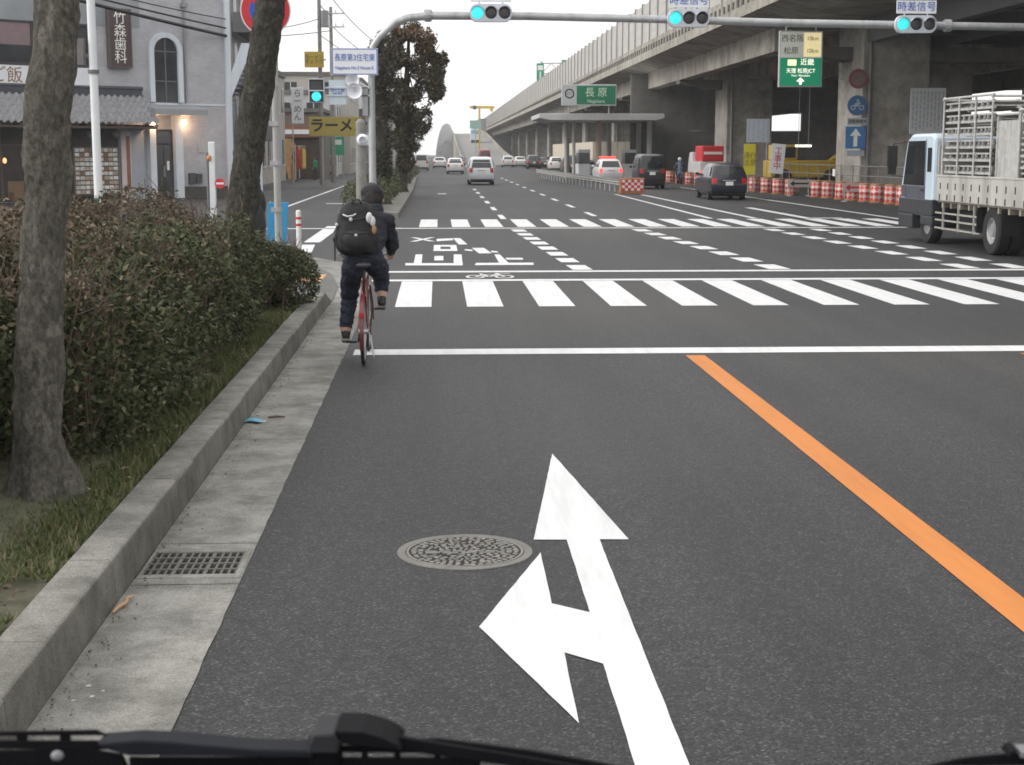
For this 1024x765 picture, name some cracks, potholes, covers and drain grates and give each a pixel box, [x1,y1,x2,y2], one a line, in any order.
manhole cover [397,534,533,570]
drain grate [135,548,253,581]
